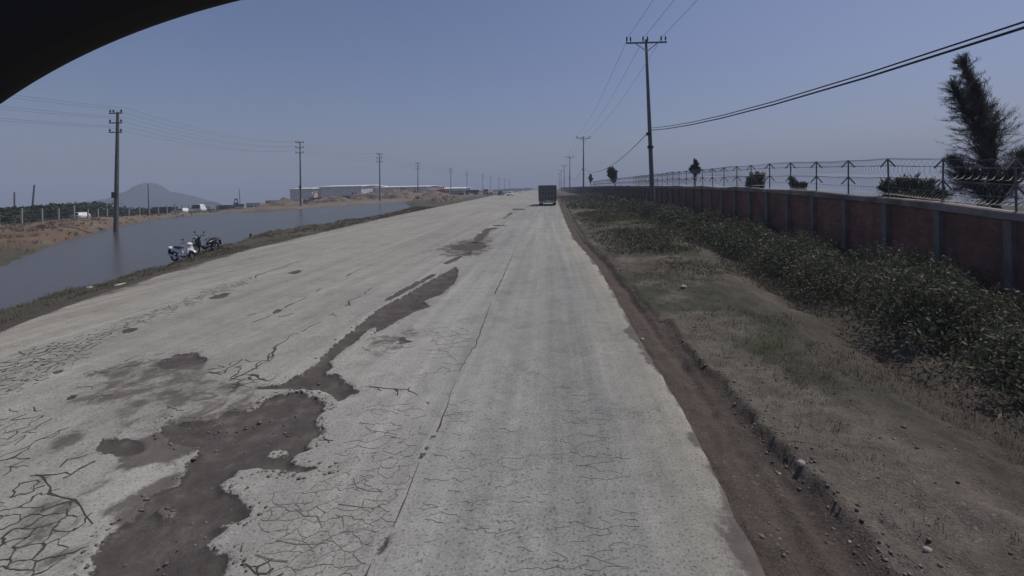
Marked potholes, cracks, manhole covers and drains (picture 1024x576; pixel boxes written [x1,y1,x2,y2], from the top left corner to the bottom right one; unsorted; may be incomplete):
pothole [145,349,214,372]
pothole [203,292,236,301]
crack [421,328,472,373]
pothole [409,432,443,464]
pothole [437,255,467,265]
pothole [467,227,501,242]
crack [235,400,428,576]
crack [414,386,648,573]
pothole [441,239,494,257]
pothole [233,266,464,407]
pothole [70,389,342,576]
